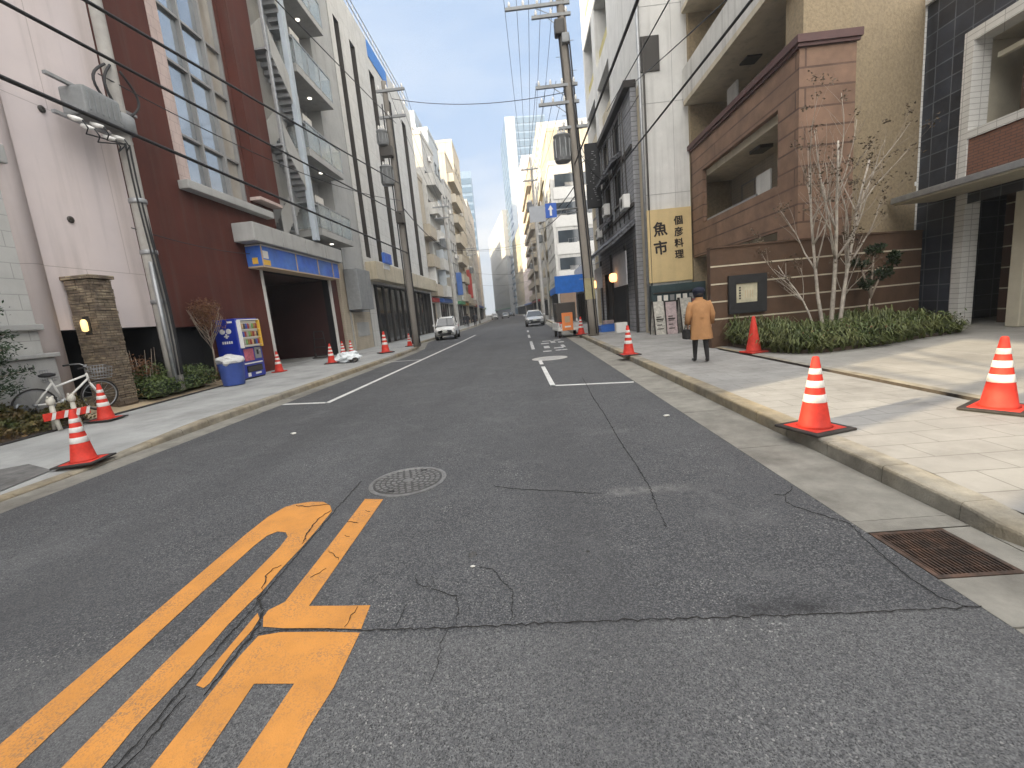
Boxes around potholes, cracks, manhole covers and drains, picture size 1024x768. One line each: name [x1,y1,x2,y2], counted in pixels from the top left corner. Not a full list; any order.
crack [775,486,967,607]
manhole cover [368,467,447,497]
crack [204,565,281,695]
crack [415,576,459,682]
drain grate [869,526,1024,579]
crack [494,485,593,494]
